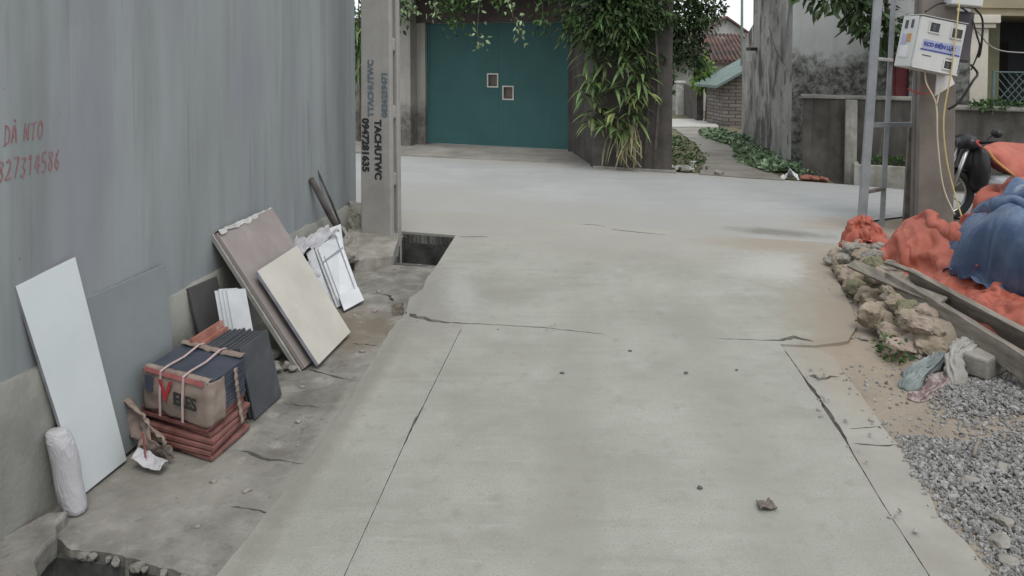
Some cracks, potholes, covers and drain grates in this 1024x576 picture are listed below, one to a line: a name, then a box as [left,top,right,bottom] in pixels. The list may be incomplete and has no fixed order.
crack [344,293,602,576]
crack [241,451,303,464]
crack [739,335,930,576]
